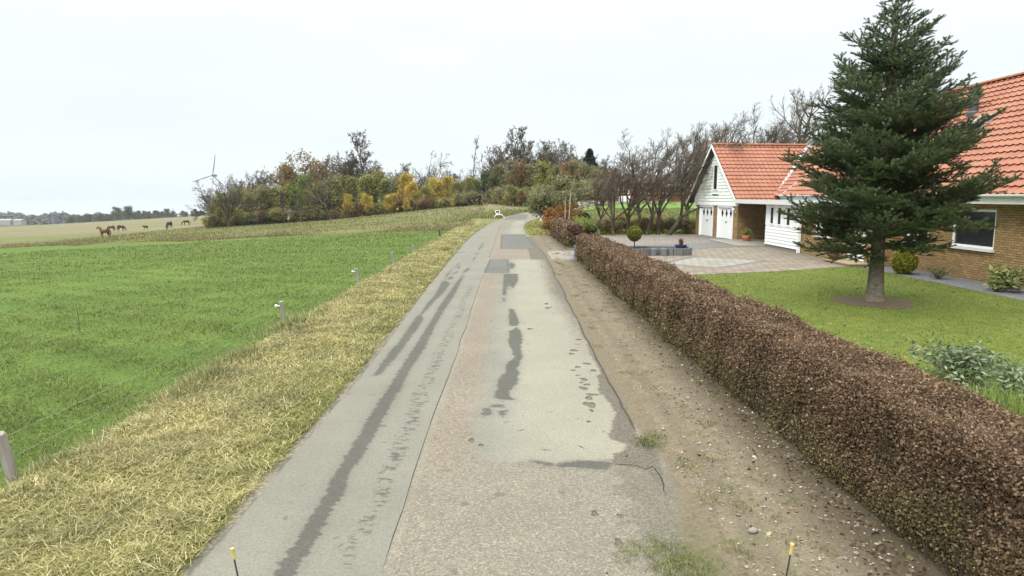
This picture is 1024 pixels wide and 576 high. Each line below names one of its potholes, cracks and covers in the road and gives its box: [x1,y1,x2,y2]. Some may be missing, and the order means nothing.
crack [610,463,667,495]
